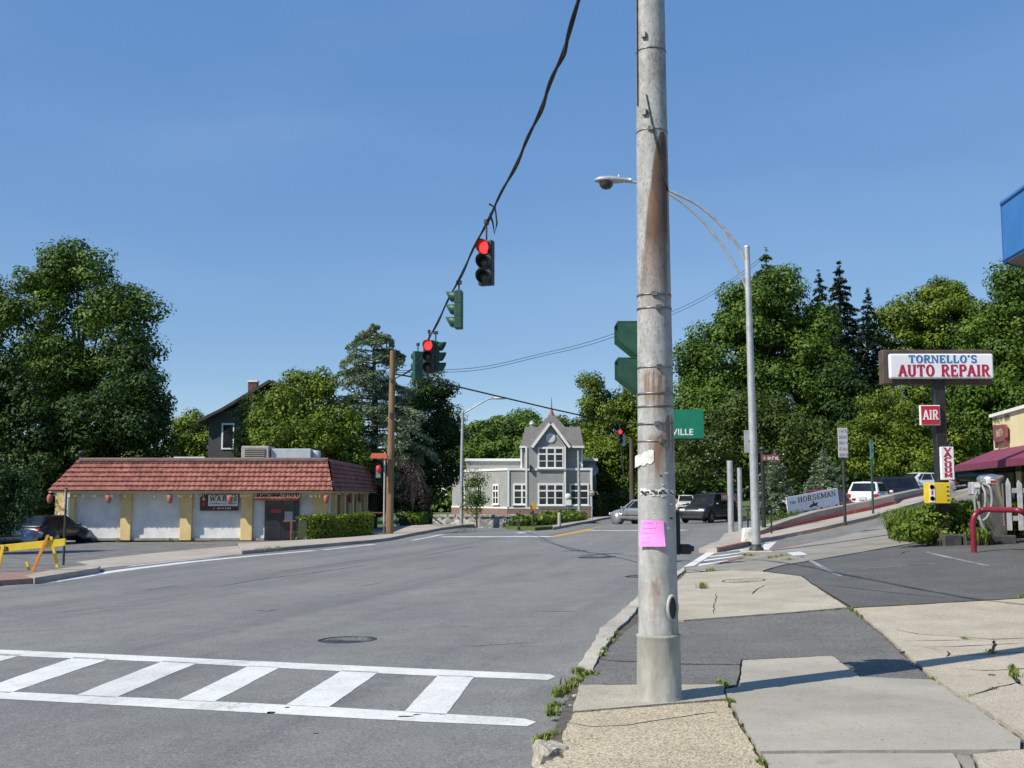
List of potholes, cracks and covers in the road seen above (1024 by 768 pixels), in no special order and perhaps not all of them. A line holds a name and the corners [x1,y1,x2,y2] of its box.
manhole cover [317,636,377,644]
crack [897,629,1024,695]
